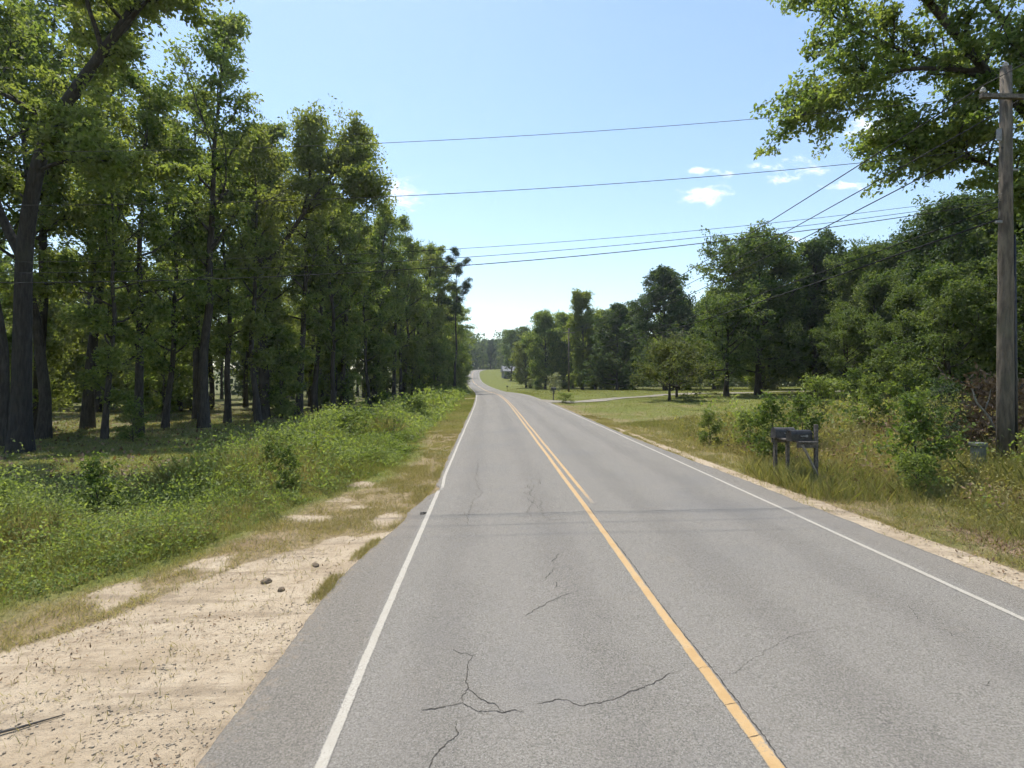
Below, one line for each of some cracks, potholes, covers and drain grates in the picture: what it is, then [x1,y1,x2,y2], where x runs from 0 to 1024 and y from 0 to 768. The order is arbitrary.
crack [423,649,522,768]
crack [542,672,674,706]
